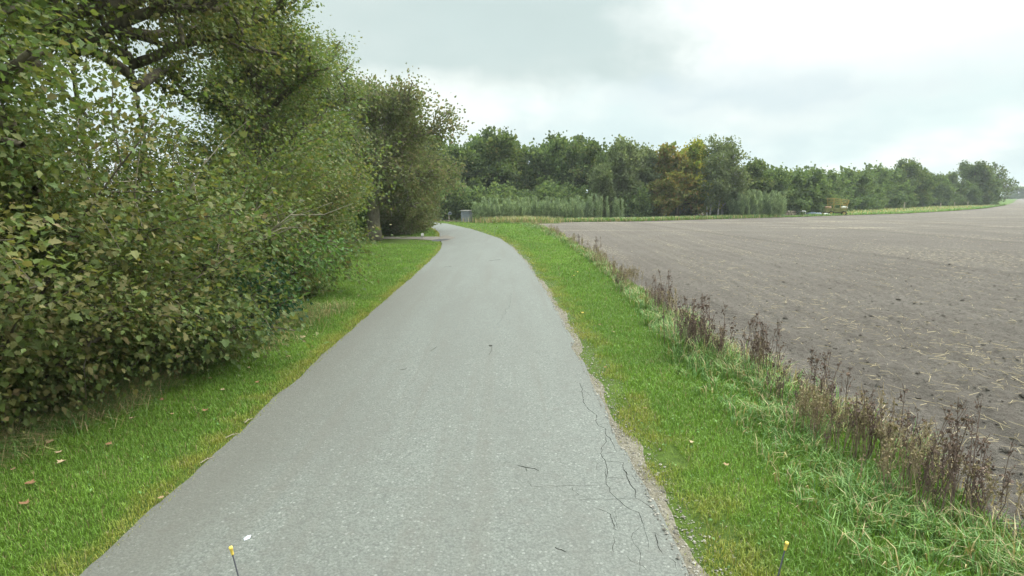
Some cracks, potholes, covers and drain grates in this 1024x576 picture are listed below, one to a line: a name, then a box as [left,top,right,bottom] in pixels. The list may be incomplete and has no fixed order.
crack [527,381,677,569]
